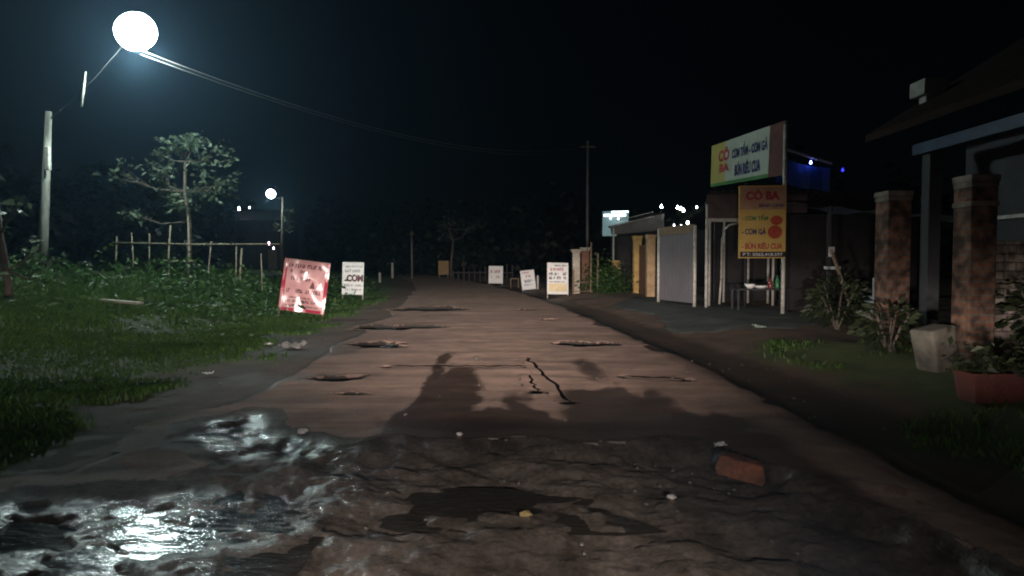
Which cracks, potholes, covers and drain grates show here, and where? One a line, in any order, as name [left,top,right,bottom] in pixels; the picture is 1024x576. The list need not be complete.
pothole [338,340,415,349]
pothole [0,404,1024,576]
pothole [319,390,381,398]
pothole [288,373,381,383]
pothole [545,340,629,348]
crack [390,357,582,404]
